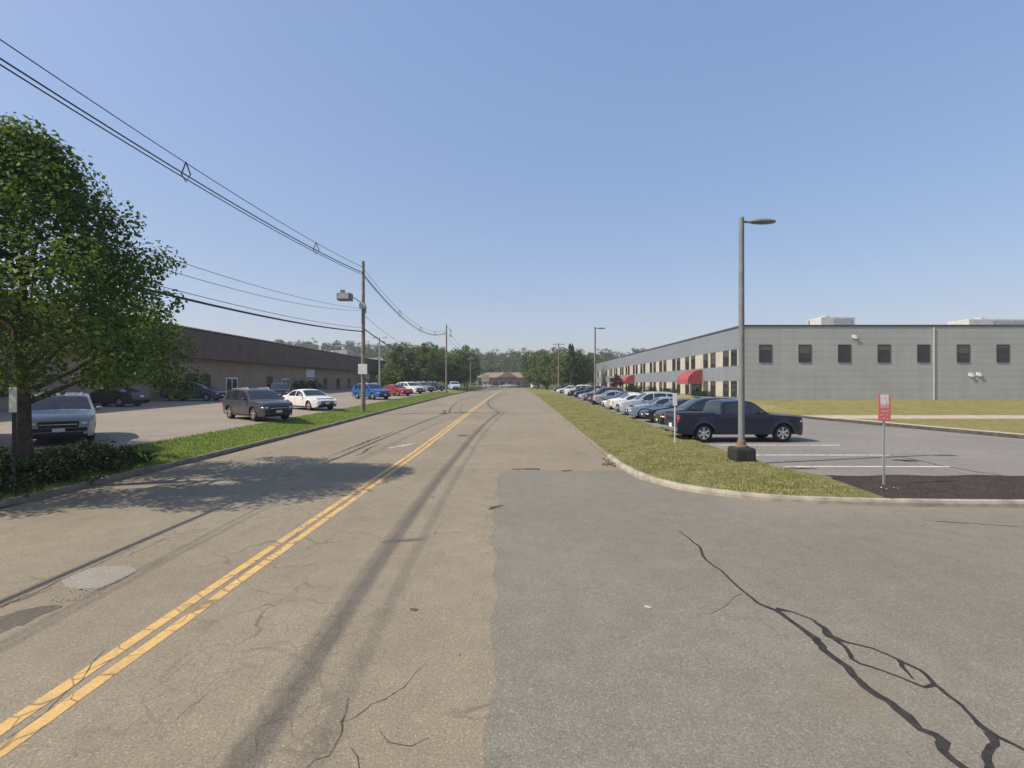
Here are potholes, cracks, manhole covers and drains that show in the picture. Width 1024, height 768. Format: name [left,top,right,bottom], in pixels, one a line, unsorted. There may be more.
crack [6,656,98,739]
crack [308,670,418,768]
crack [679,520,1024,768]
